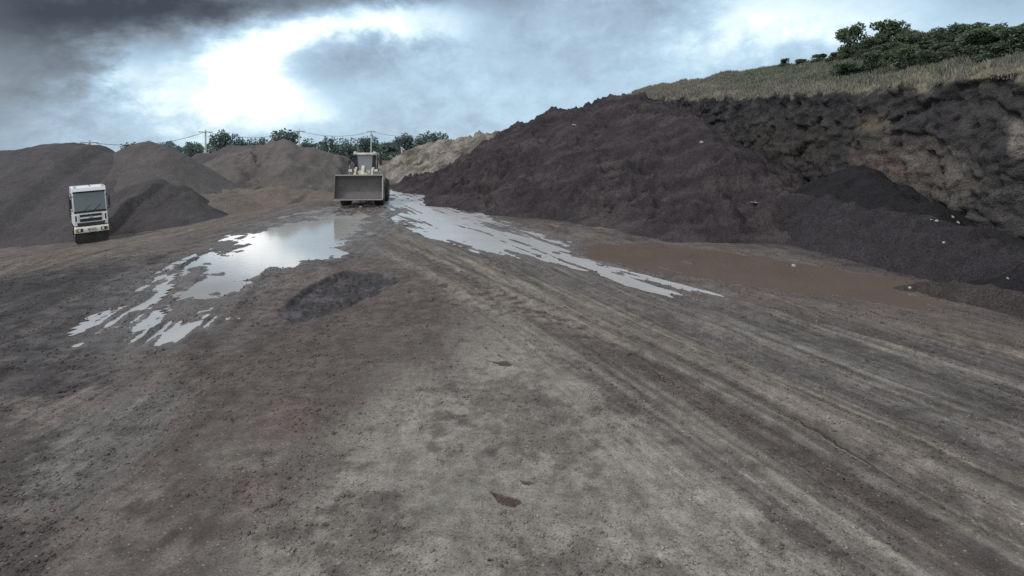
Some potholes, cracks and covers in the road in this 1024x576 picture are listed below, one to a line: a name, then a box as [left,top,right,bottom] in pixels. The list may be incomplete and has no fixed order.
pothole [486,490,527,511]
crack [770,404,913,491]
pothole [267,269,409,328]
